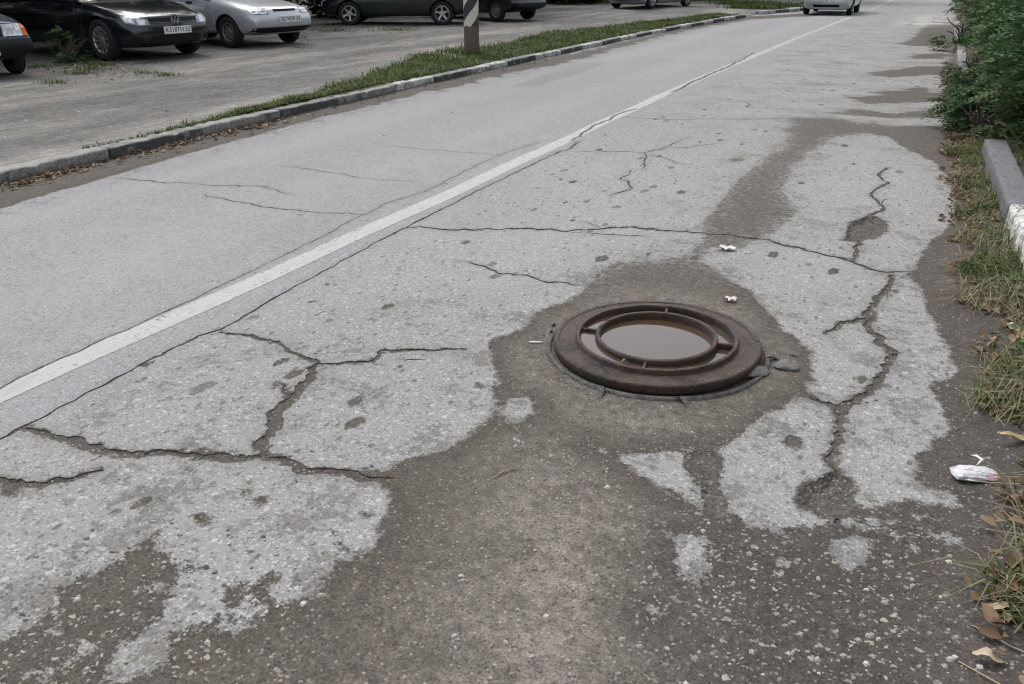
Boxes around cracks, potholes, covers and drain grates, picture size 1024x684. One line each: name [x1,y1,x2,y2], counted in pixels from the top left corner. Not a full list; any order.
crack [605,138,707,195]
crack [133,179,362,215]
crack [0,332,463,489]
crack [404,168,902,531]
manhole cover [542,300,783,407]
pothole [845,214,888,241]
